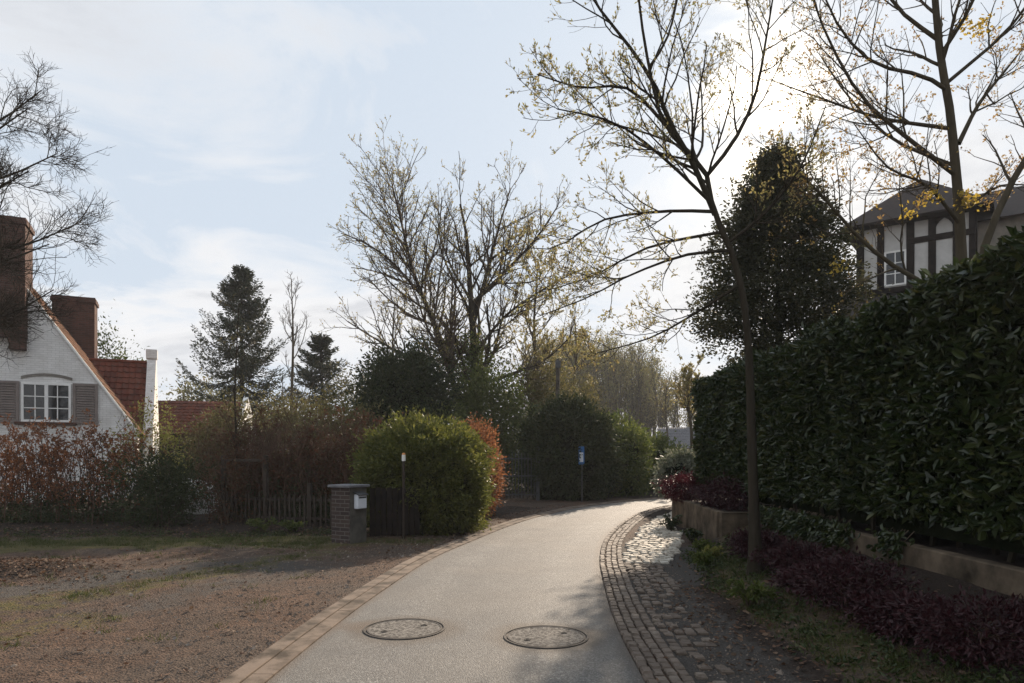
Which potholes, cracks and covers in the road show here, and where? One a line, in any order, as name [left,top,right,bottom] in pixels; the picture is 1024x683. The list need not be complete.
manhole cover [363,618,445,640]
manhole cover [504,625,589,649]
